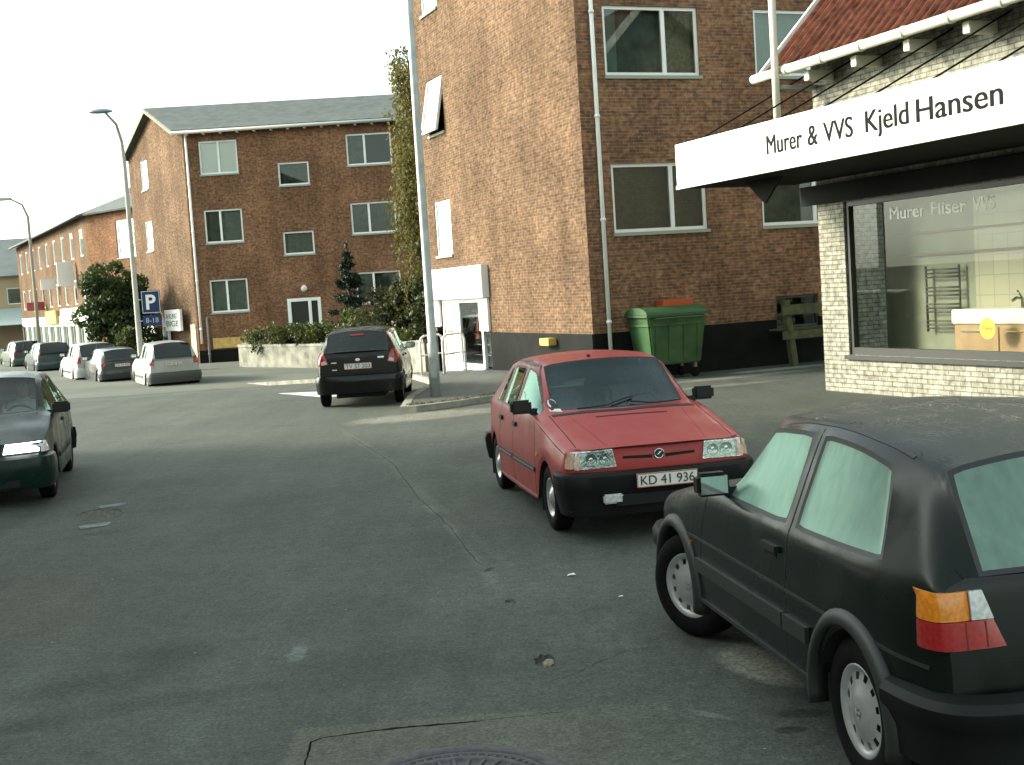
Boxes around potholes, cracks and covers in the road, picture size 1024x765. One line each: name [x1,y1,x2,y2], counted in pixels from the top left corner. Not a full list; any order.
crack [304,712,560,765]
crack [352,437,482,565]
manhole cover [377,745,567,765]
pothole [534,654,555,666]
